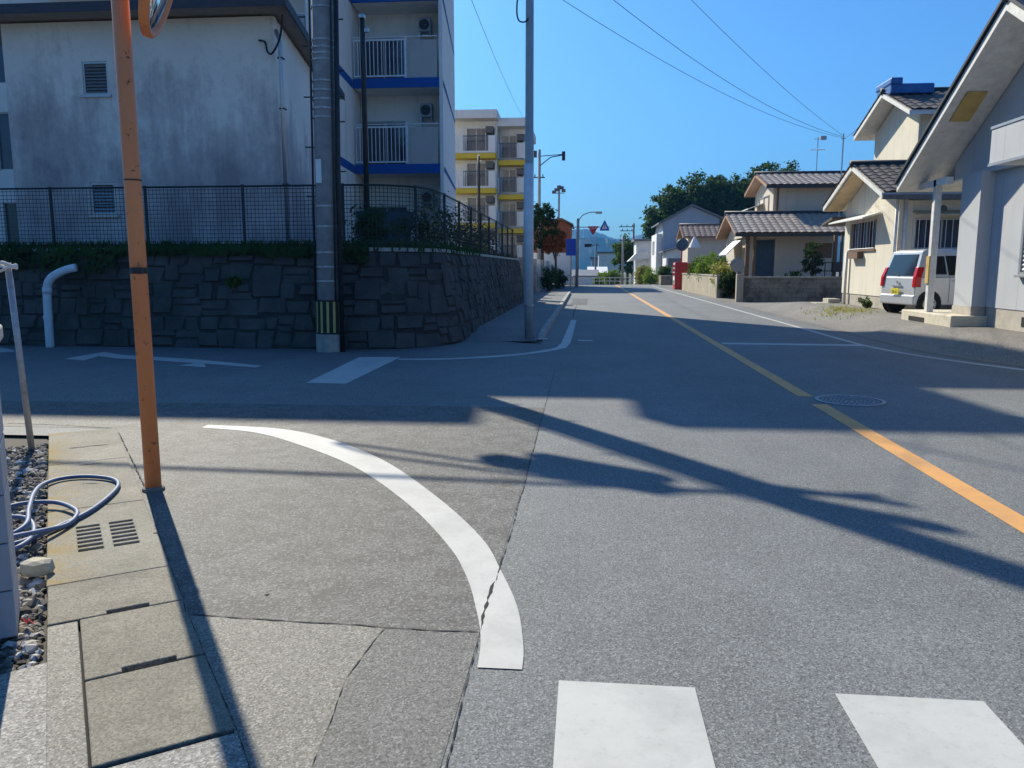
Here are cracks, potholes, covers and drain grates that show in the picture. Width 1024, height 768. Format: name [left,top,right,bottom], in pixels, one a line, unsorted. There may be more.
manhole cover [815,395,886,407]
